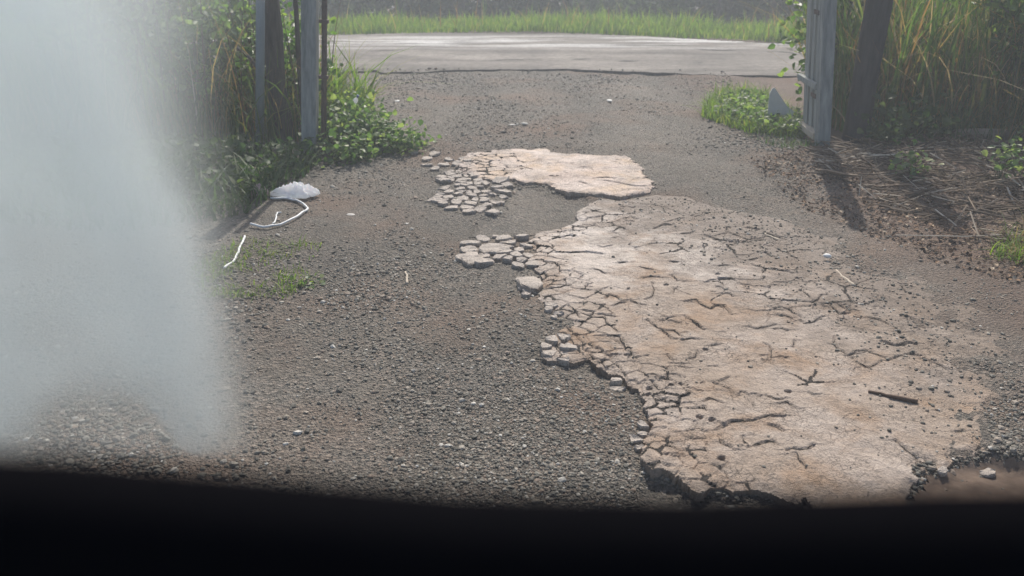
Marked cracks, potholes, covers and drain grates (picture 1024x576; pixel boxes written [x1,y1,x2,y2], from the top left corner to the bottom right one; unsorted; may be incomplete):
crack [527,209,944,490]
crack [457,150,533,178]
